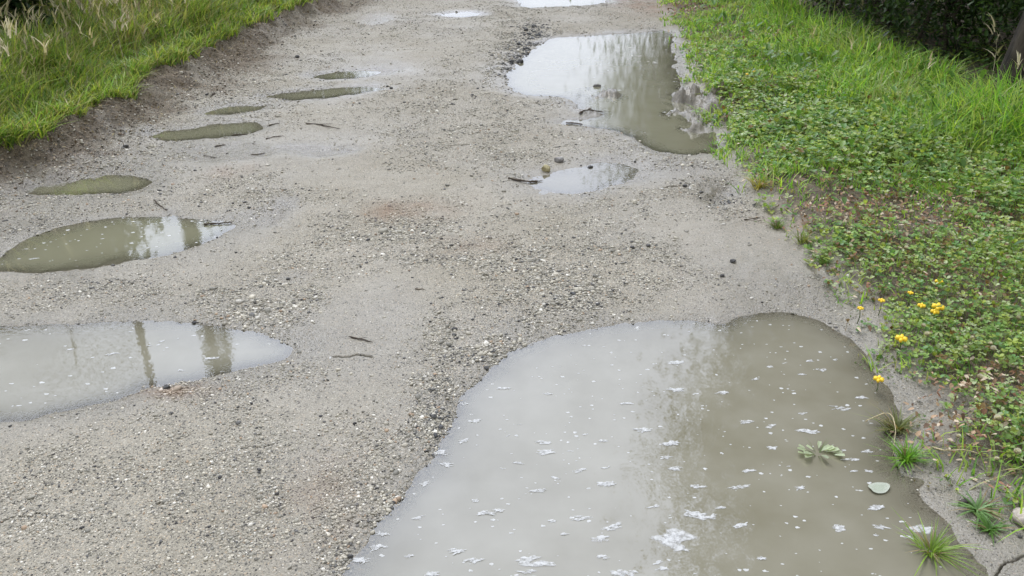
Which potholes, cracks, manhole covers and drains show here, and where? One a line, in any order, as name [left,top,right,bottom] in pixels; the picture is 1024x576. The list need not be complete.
pothole [525,161,644,195]
pothole [6,172,163,197]
pothole [263,84,390,101]
pothole [0,315,308,429]
